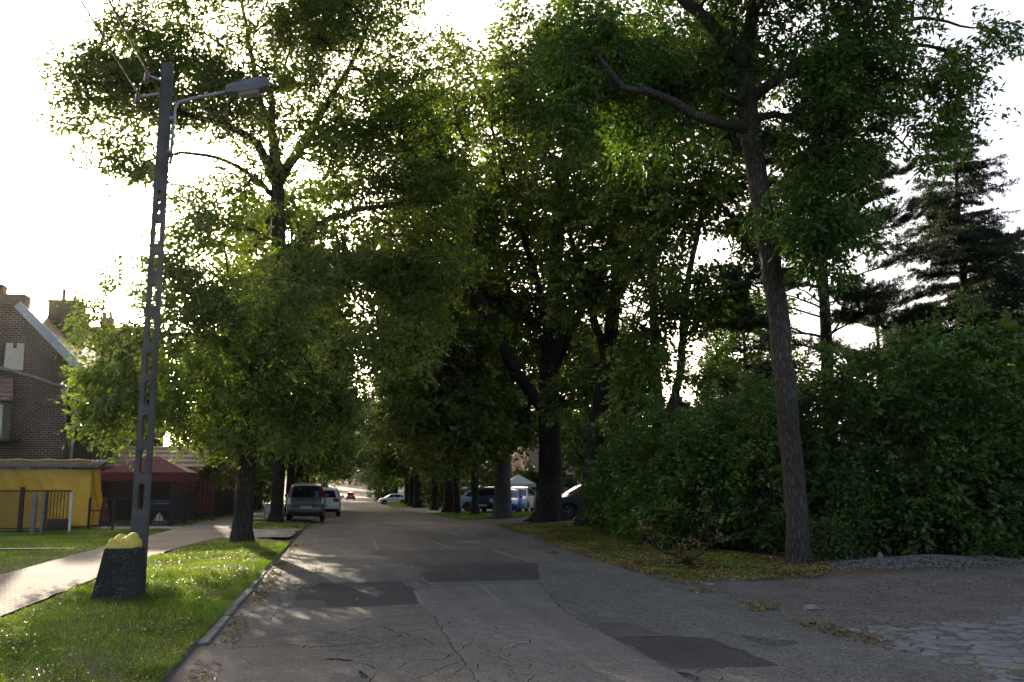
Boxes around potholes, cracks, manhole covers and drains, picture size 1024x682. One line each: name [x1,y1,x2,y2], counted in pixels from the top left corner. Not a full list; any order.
crack [224,597,554,682]
